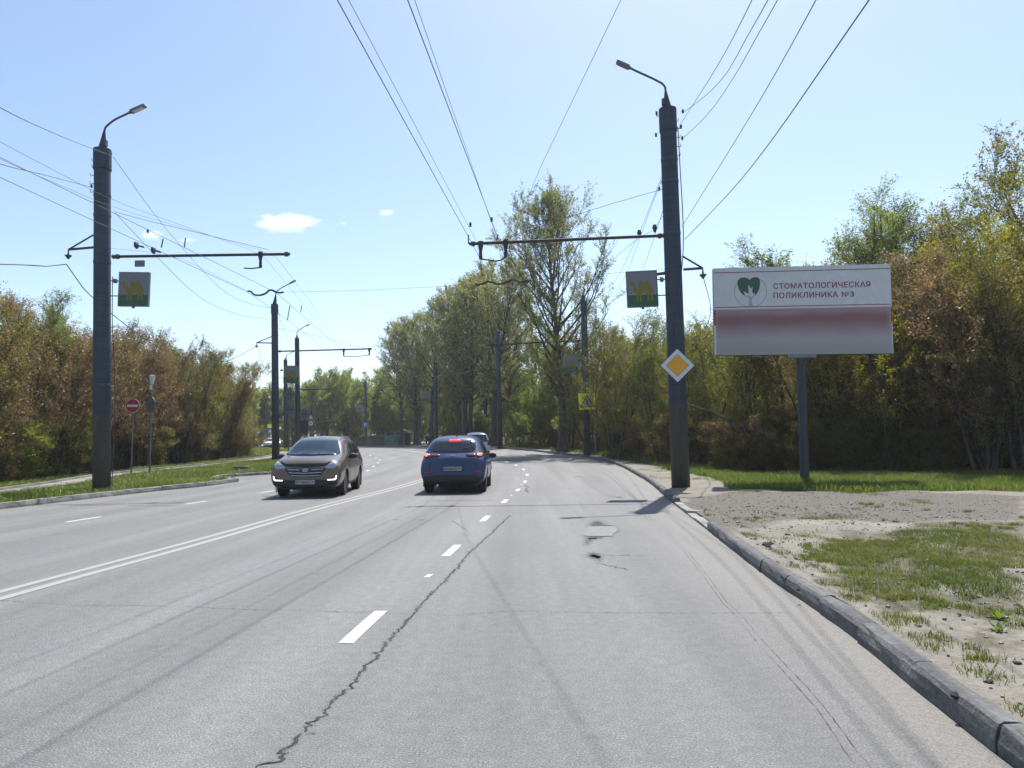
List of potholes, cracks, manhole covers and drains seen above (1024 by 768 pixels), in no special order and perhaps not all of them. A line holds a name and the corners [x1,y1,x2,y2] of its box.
crack [3,515,766,767]
